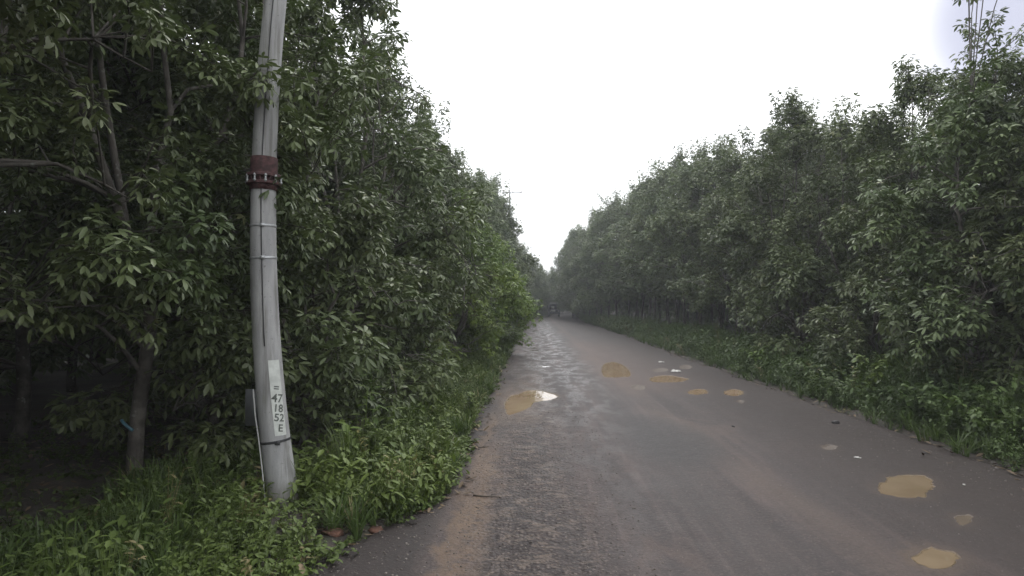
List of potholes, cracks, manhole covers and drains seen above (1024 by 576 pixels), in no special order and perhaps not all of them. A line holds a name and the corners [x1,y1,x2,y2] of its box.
pothole [601,362,631,378]
pothole [503,390,559,415]
pothole [911,546,961,569]
pothole [877,475,935,498]
pothole [953,514,974,526]
